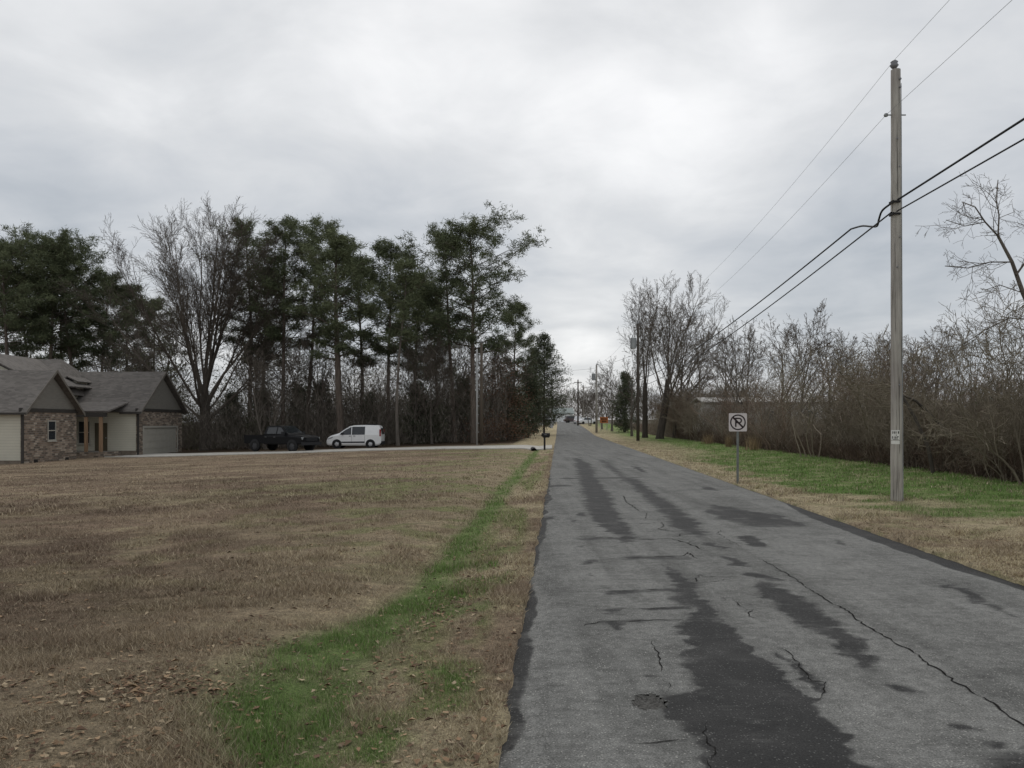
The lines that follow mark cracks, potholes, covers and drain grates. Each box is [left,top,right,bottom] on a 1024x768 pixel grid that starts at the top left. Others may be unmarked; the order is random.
pothole [631,693,669,711]
crack [763,560,1024,726]
crack [618,496,700,558]
